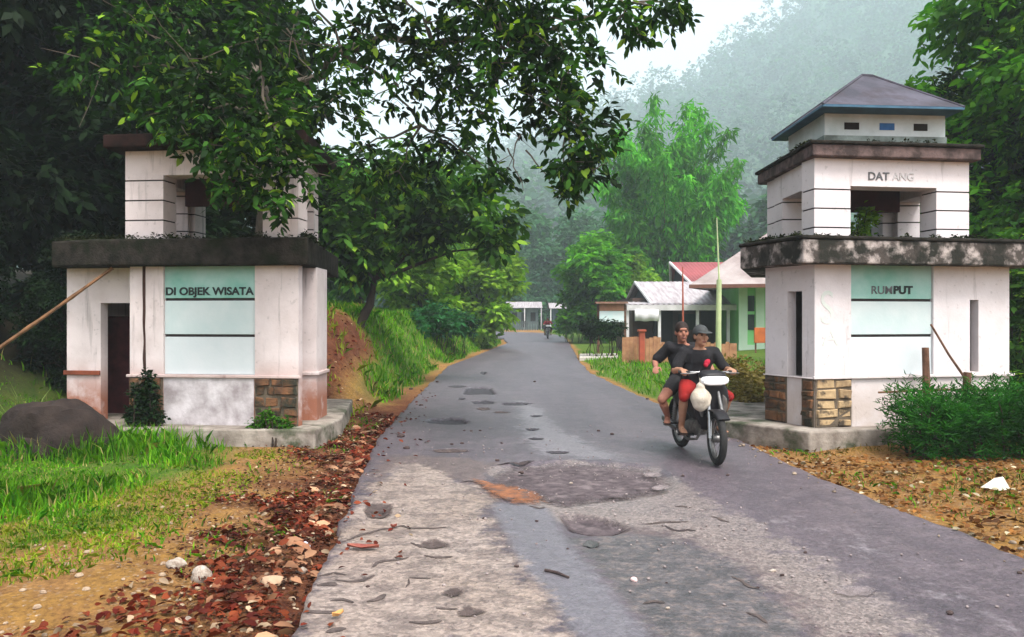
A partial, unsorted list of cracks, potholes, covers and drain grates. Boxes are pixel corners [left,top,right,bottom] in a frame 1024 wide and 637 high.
pothole [365,503,392,518]
pothole [561,516,626,536]
crack [300,525,453,633]
pothole [493,464,663,506]
pothole [421,539,448,548]
pothole [458,606,485,616]
pothole [443,588,463,596]
crack [646,506,729,531]
